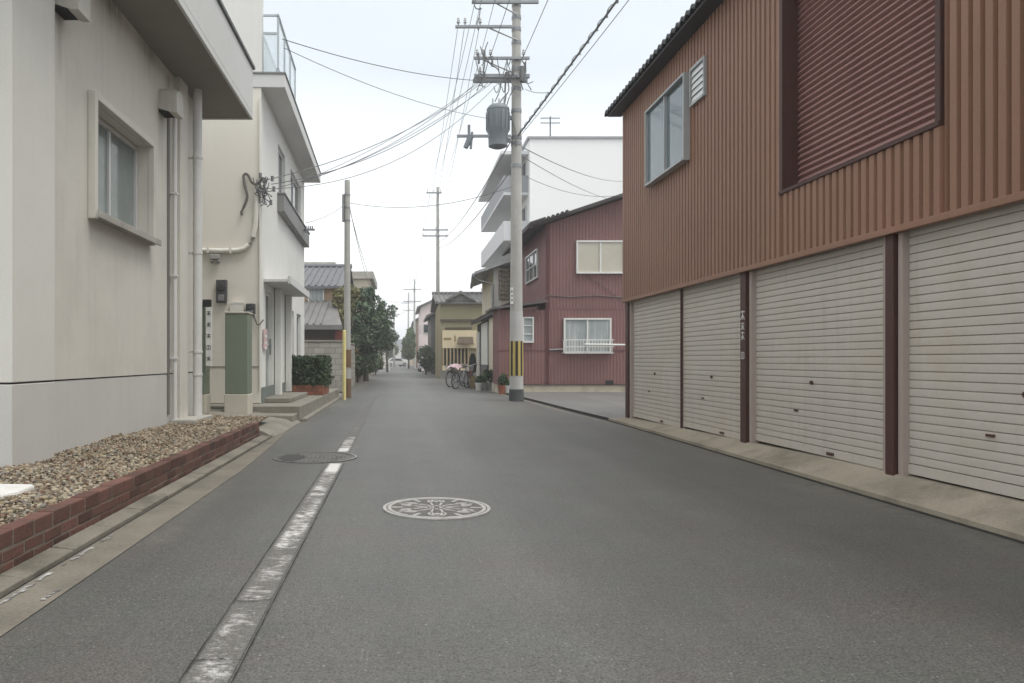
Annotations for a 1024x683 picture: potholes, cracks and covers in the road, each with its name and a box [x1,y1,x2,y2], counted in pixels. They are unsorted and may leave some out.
manhole cover [383,497,491,520]
manhole cover [272,452,357,463]
